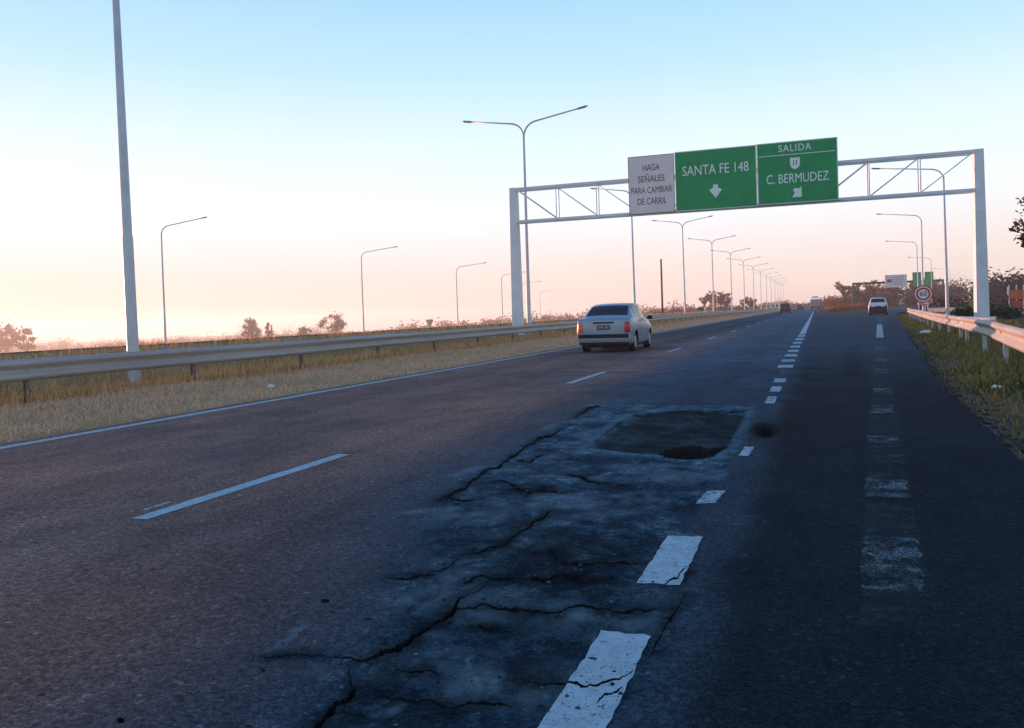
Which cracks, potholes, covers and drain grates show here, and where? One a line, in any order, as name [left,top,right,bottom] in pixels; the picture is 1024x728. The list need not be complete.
crack [262,406,688,728]
pothole [657,446,727,460]
pothole [749,422,782,439]
